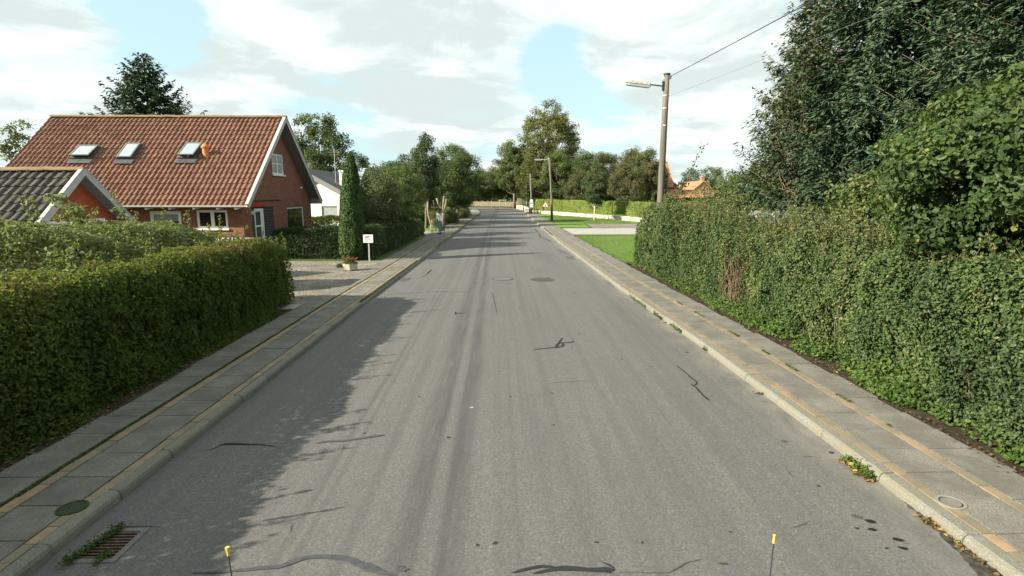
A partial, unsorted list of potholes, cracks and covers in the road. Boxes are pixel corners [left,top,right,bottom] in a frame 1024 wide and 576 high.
drain grate [67,528,150,563]
manhole cover [935,495,967,510]
manhole cover [55,500,90,516]
